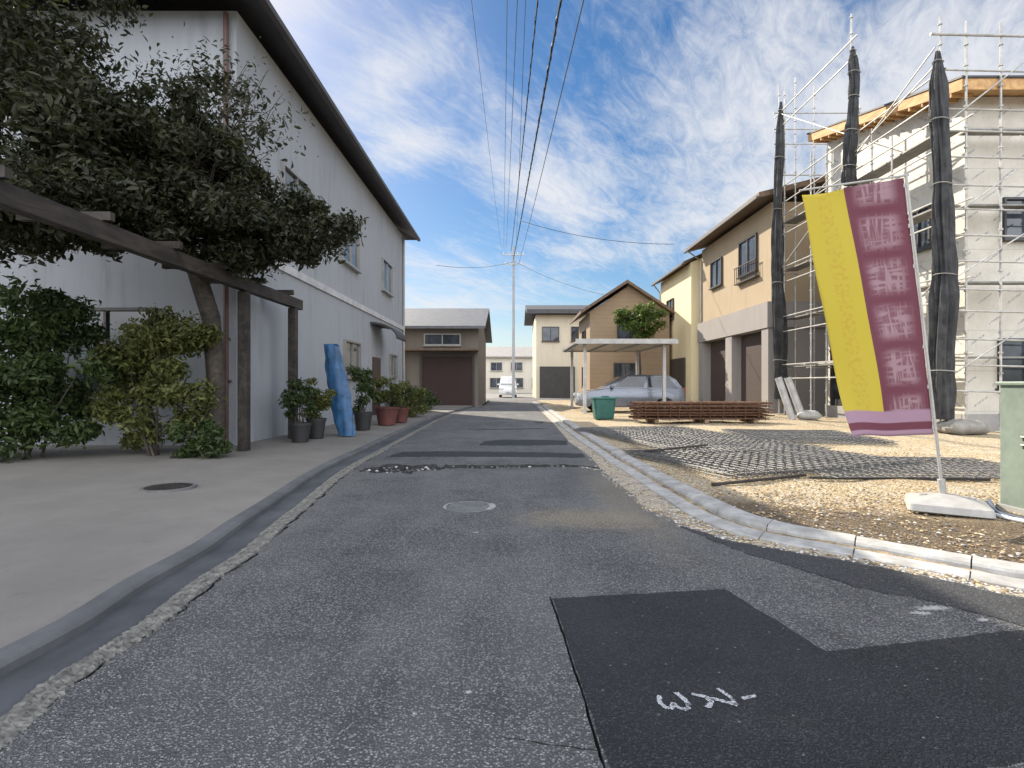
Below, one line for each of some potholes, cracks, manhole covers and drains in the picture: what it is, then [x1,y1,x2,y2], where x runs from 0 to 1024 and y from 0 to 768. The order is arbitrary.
manhole cover [140,482,197,493]
crack [503,737,598,751]
manhole cover [443,501,496,512]
